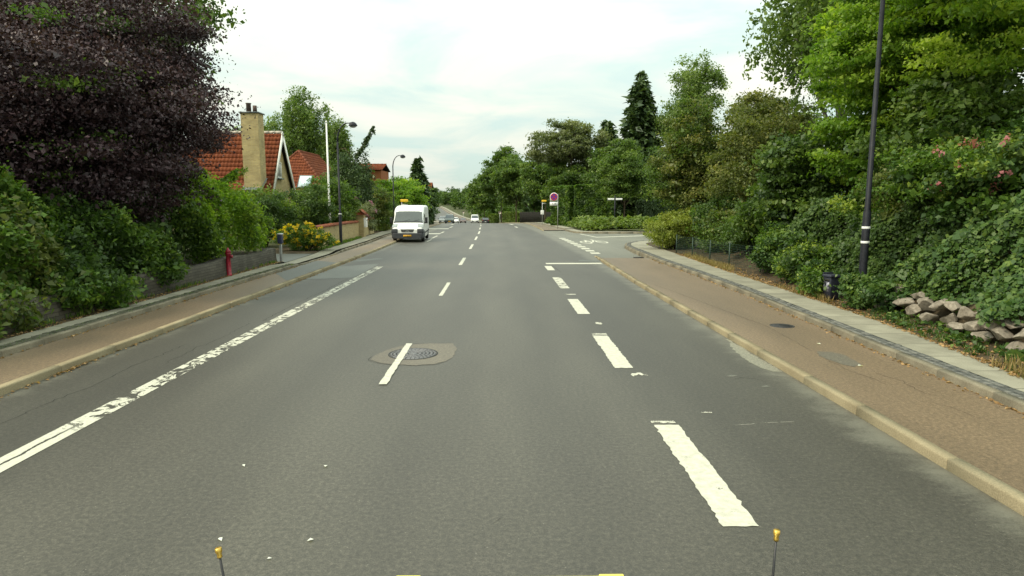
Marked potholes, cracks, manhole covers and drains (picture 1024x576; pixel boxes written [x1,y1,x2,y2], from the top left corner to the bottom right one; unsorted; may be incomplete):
manhole cover [388,348,438,360]
